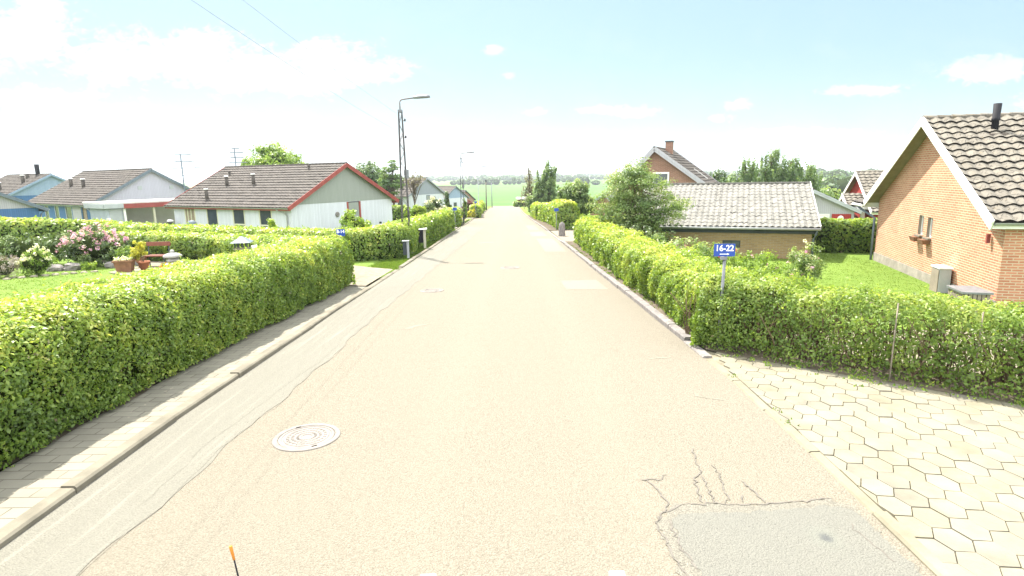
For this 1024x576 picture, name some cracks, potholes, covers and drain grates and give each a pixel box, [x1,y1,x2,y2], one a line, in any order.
crack [641,449,825,576]
manhole cover [272,423,341,452]
